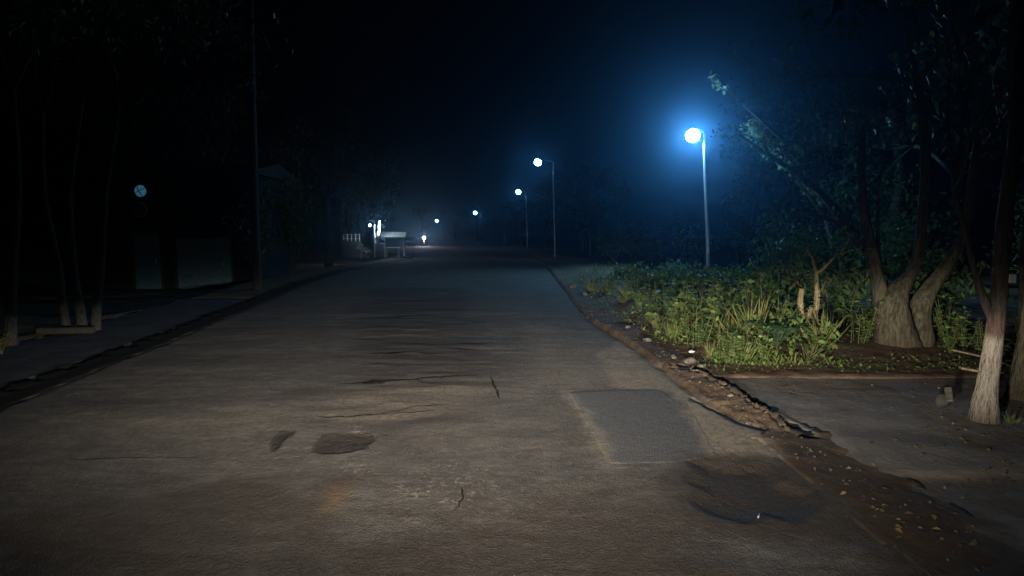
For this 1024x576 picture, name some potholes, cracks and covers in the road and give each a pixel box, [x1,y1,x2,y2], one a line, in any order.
crack [317,405,434,418]
crack [345,375,500,398]
pothole [292,428,393,462]
pothole [659,452,854,540]
